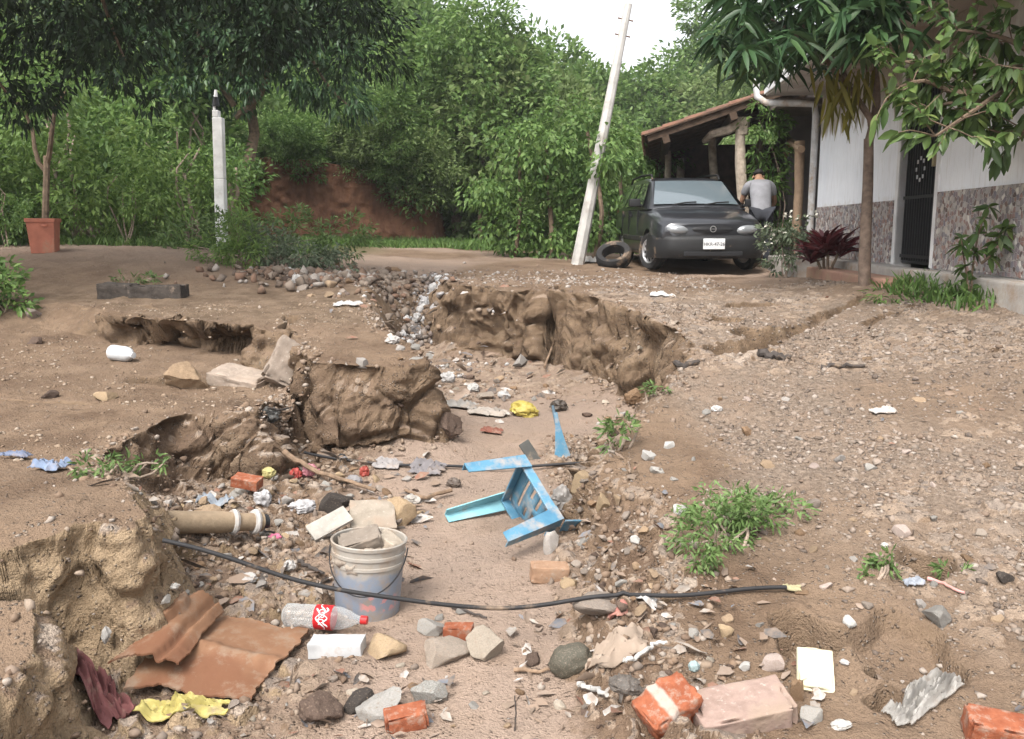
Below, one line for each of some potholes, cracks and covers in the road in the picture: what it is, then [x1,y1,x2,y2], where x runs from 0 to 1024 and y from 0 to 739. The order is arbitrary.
crack [695,292,931,355]
pothole [766,606,845,660]
